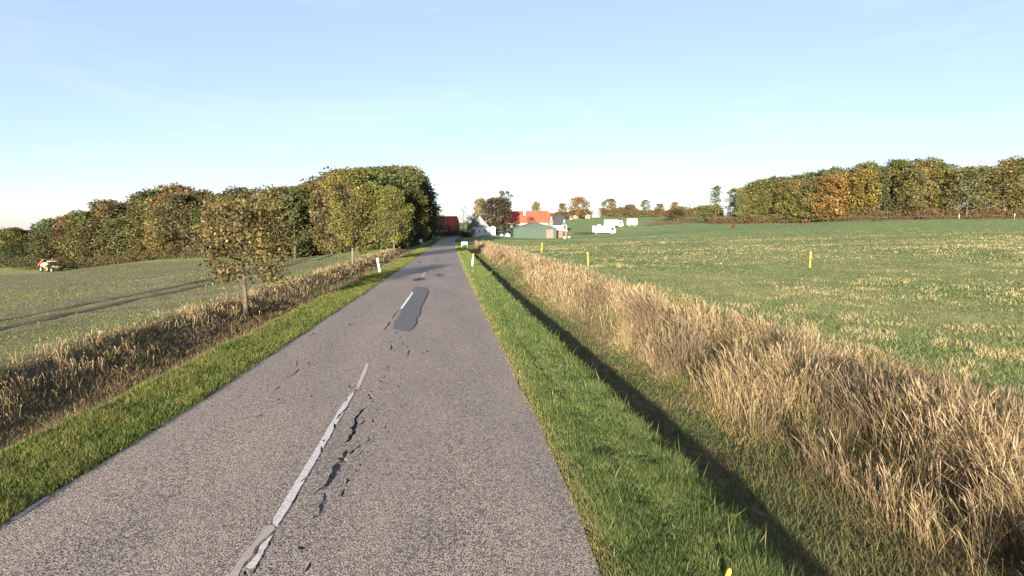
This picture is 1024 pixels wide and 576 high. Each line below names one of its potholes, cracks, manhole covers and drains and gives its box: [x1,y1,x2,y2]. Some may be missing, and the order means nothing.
crack [338,290,429,455]
